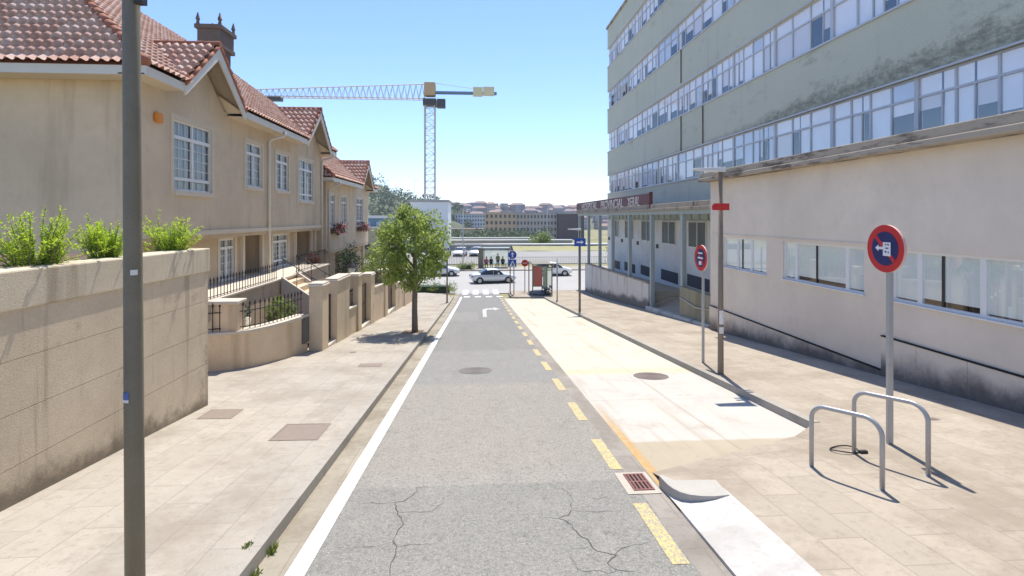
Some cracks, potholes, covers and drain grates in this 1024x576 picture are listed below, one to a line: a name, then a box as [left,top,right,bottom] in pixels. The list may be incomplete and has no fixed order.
crack [363,487,441,571]
utility cover [197,409,243,419]
crack [540,490,647,573]
manhole cover [633,372,669,380]
utility cover [268,423,331,441]
drain grate [615,472,662,494]
